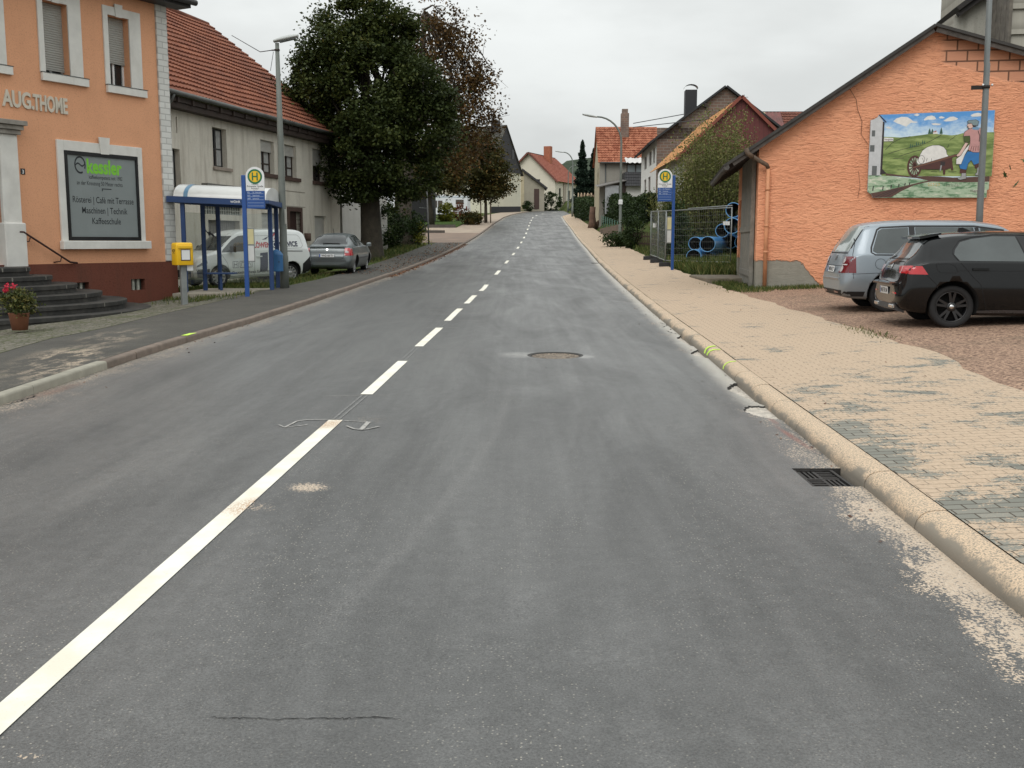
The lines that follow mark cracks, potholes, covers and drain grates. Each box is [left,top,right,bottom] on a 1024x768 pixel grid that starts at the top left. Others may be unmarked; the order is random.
drain grate [794,470,855,487]
